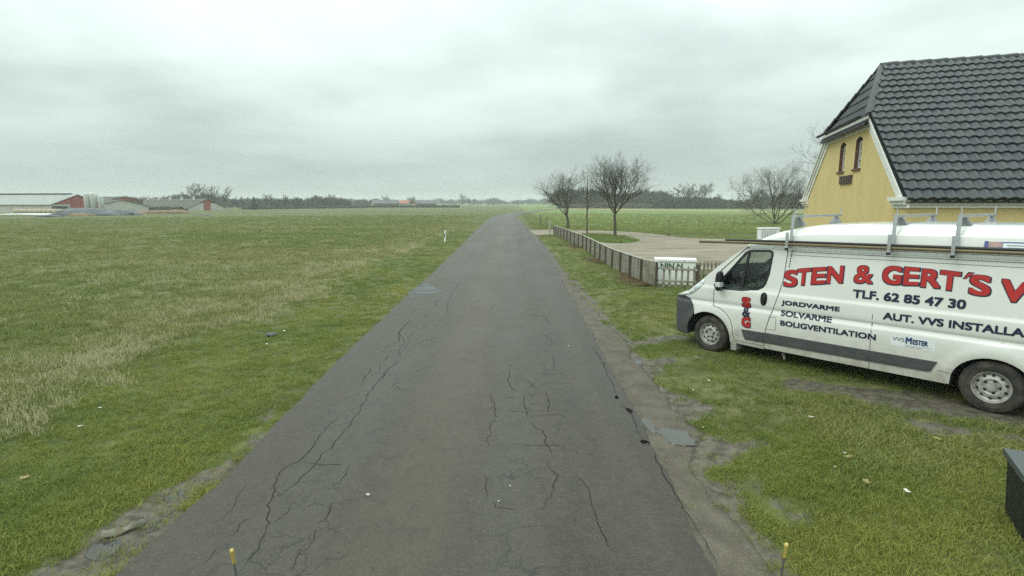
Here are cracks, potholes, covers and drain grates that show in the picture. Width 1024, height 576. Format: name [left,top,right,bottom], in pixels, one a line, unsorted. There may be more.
crack [211,278,458,573]
crack [594,349,716,562]
crack [486,314,564,451]
